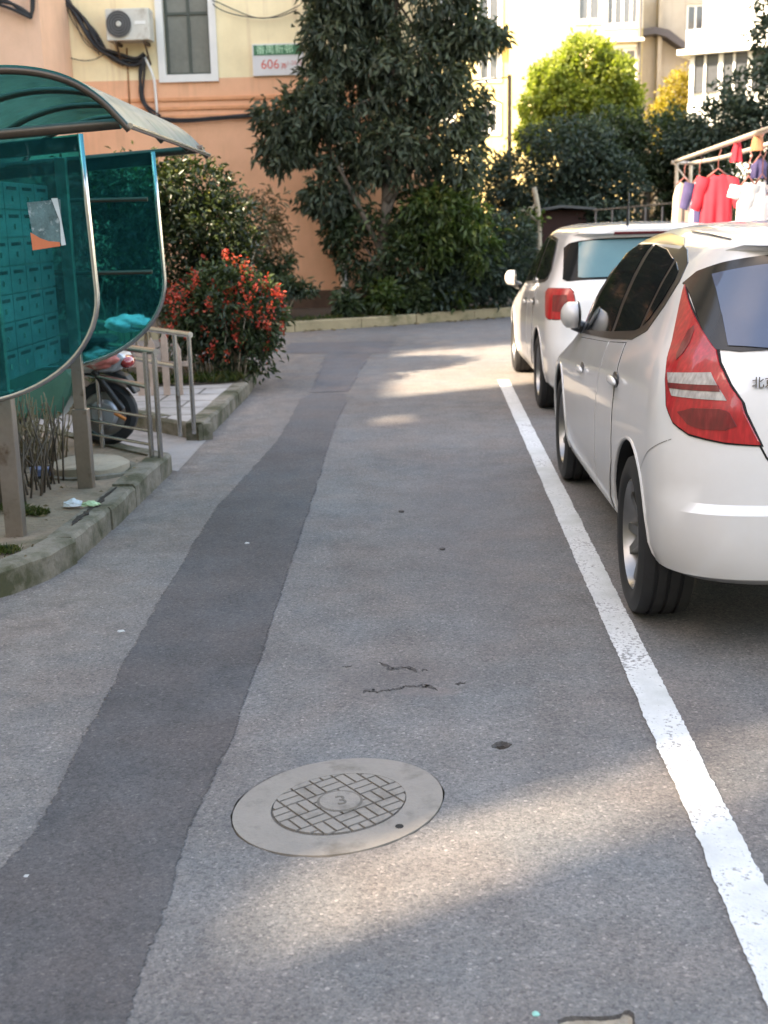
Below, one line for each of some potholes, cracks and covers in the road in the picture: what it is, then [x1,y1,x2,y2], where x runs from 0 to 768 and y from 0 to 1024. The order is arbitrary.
manhole cover [231,758,444,858]
pothole [491,741,512,750]
crack [342,662,466,694]
